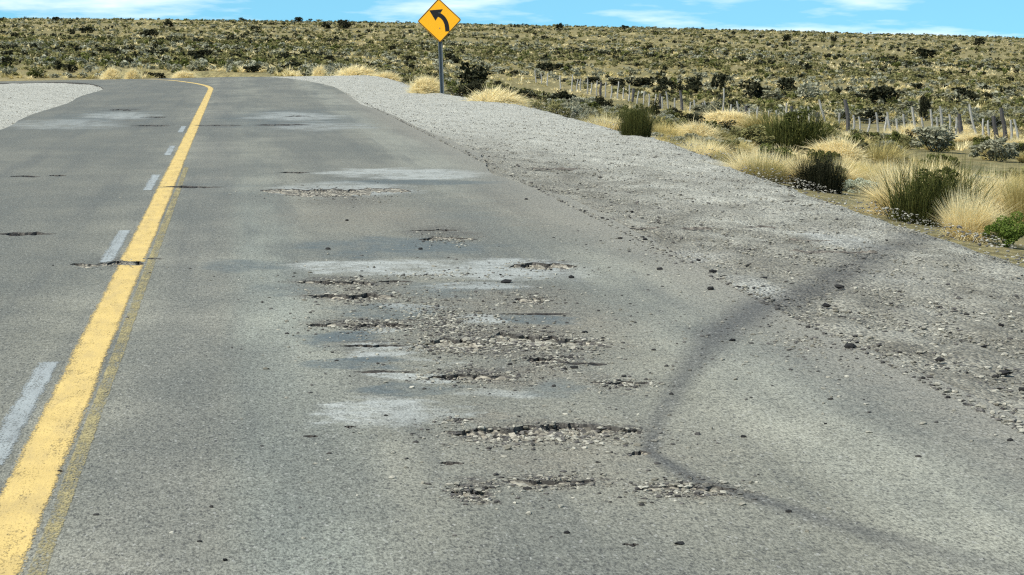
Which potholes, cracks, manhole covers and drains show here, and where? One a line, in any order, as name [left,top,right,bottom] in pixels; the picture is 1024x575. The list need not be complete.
pothole [260,188,411,197]
pothole [450,490,492,498]
pothole [415,337,484,353]
pothole [527,357,563,365]
pothole [440,423,643,444]
